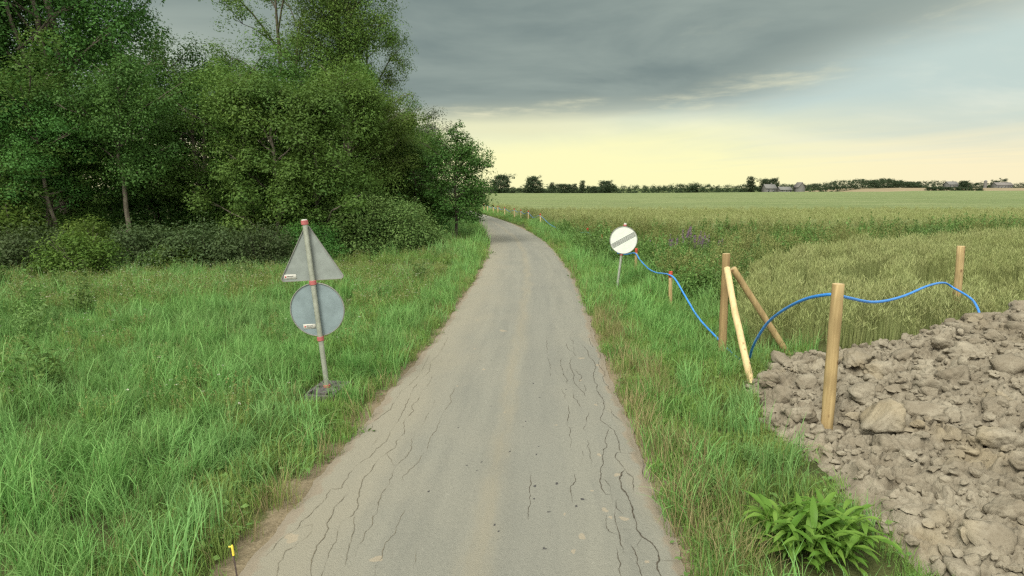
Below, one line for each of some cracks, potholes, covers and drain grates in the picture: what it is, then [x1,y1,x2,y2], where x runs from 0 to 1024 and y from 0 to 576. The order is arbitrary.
crack [271,364,455,576]
crack [546,338,672,575]
